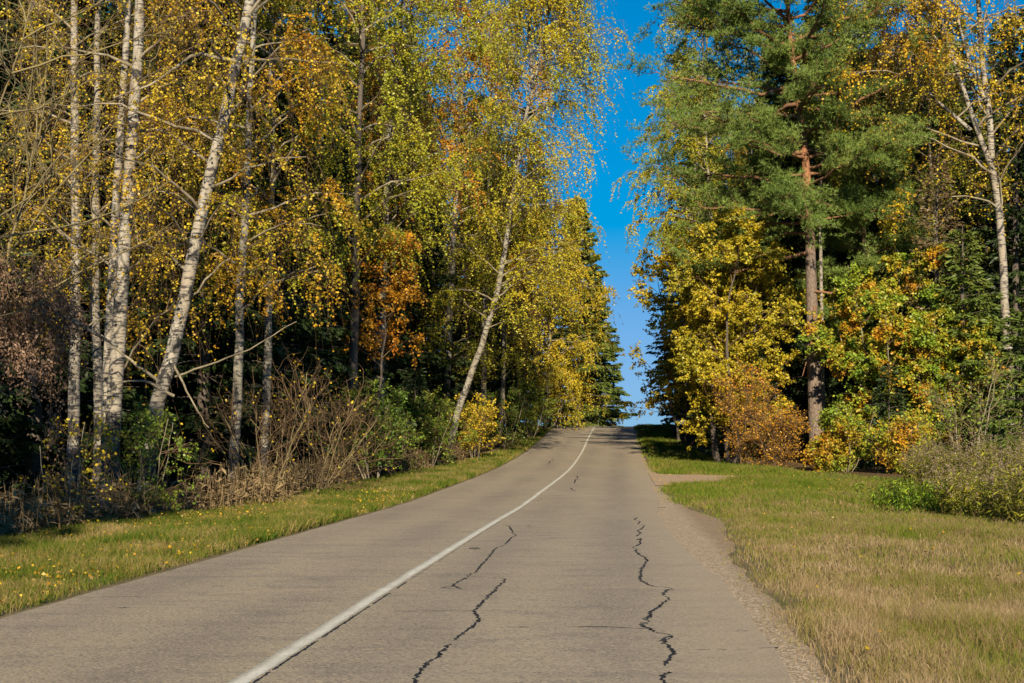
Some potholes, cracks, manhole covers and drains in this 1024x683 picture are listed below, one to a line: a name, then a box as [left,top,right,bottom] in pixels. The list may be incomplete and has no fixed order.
crack [579,507,691,683]
crack [209,524,516,683]
